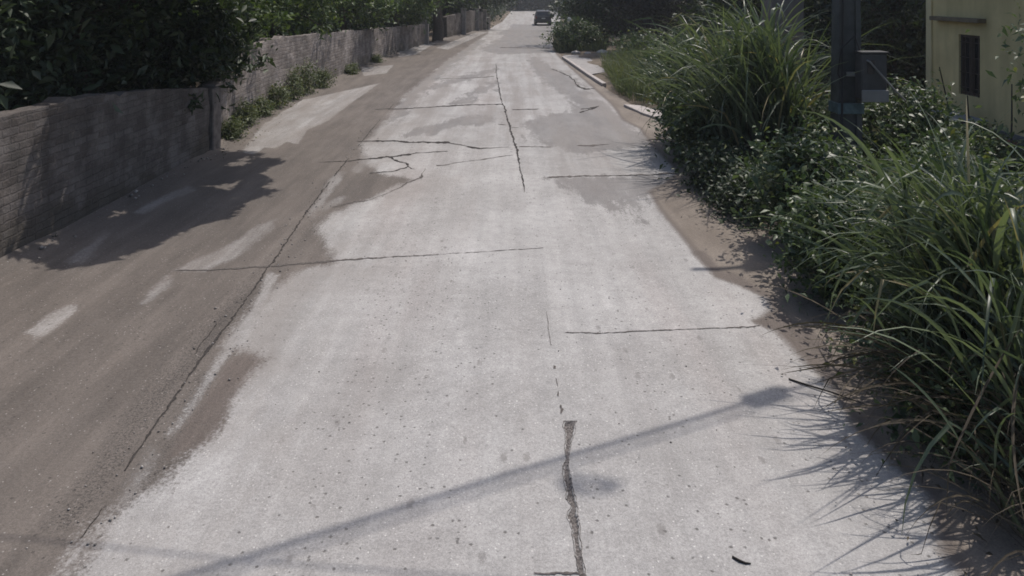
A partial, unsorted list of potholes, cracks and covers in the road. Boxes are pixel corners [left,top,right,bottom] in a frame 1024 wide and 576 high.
crack [81,47,605,537]
